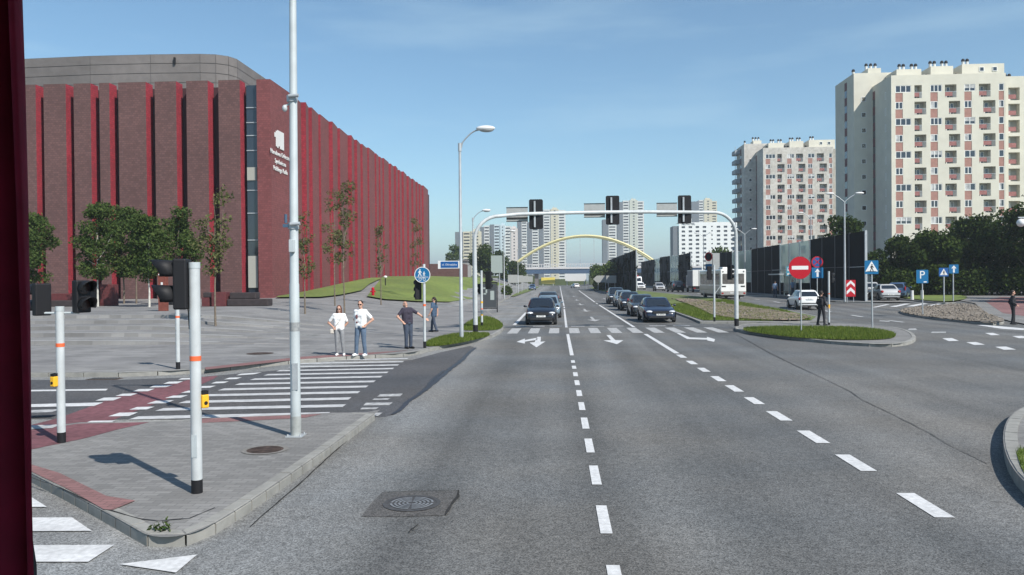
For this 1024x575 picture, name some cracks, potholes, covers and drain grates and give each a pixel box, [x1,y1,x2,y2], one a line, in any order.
manhole cover [241,445,289,454]
manhole cover [383,495,441,511]
